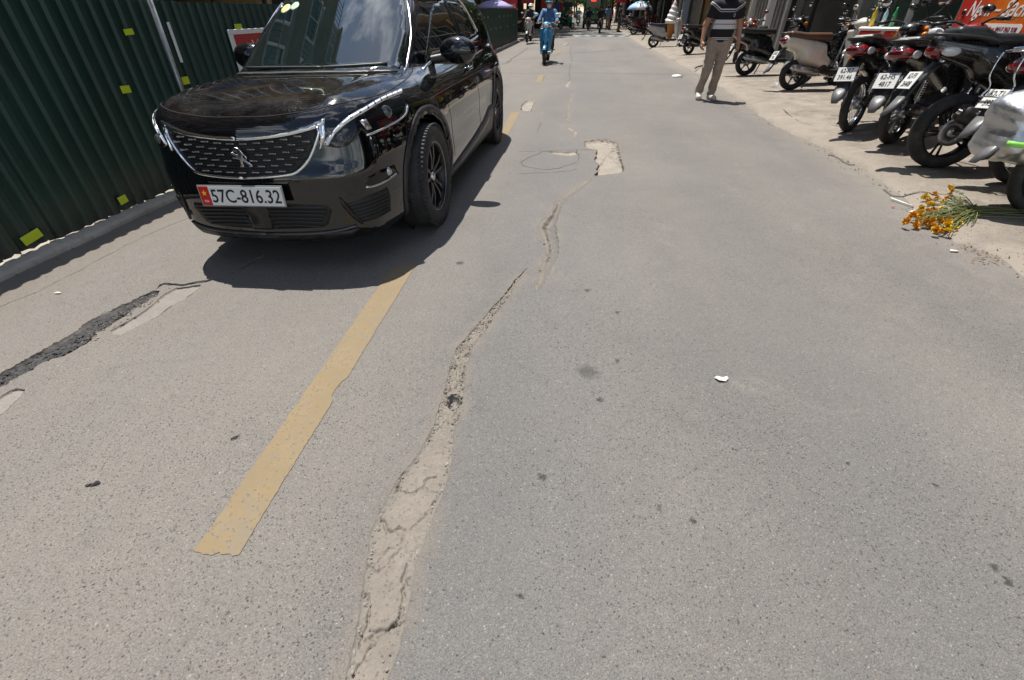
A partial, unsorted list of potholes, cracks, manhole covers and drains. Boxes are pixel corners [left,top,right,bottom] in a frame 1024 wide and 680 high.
pothole [584,138,627,176]
crack [345,42,592,680]
